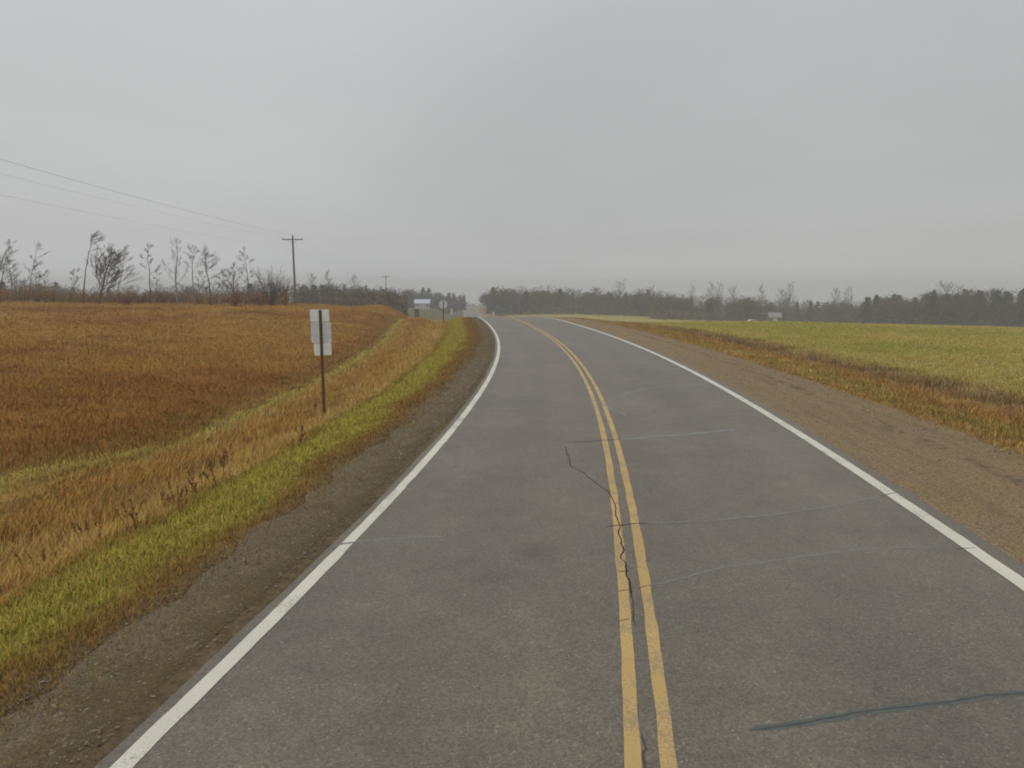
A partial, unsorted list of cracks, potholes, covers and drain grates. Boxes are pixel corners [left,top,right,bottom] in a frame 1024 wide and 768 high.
crack [331,399,964,625]
